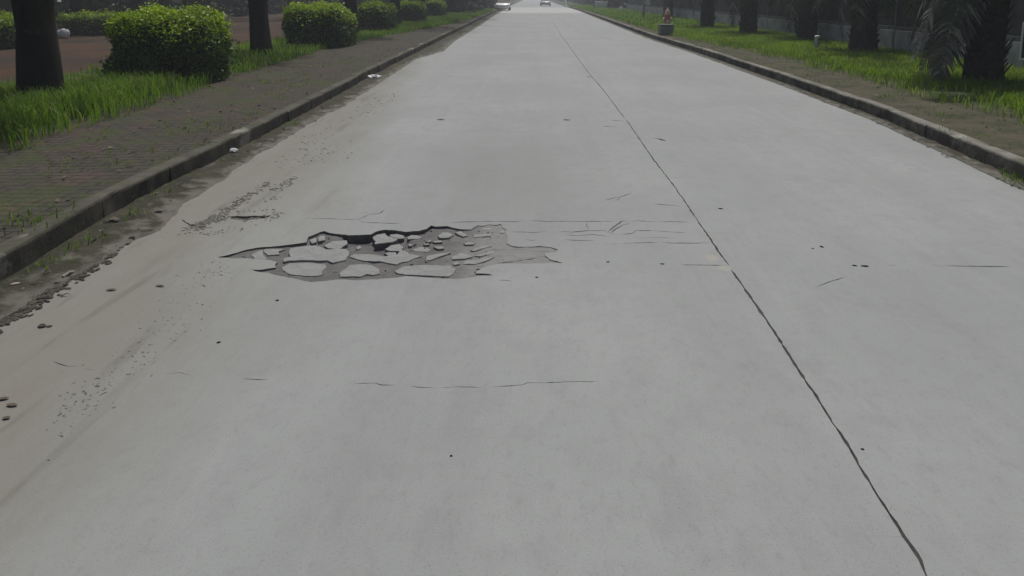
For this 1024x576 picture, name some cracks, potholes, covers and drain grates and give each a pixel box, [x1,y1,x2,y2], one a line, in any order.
crack [53,361,594,388]
pothole [220,224,562,282]
crack [452,26,927,576]
